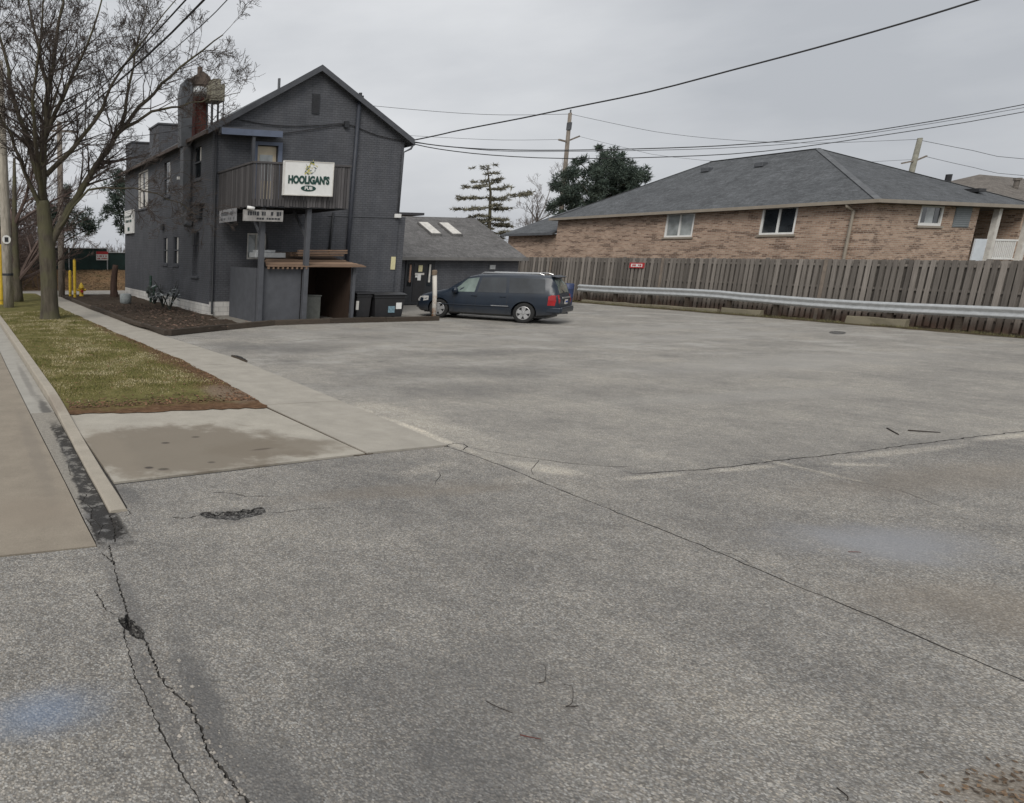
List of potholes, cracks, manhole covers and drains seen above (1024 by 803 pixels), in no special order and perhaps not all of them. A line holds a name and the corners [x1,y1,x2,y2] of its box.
crack [212,492,330,513]
crack [68,463,250,803]
